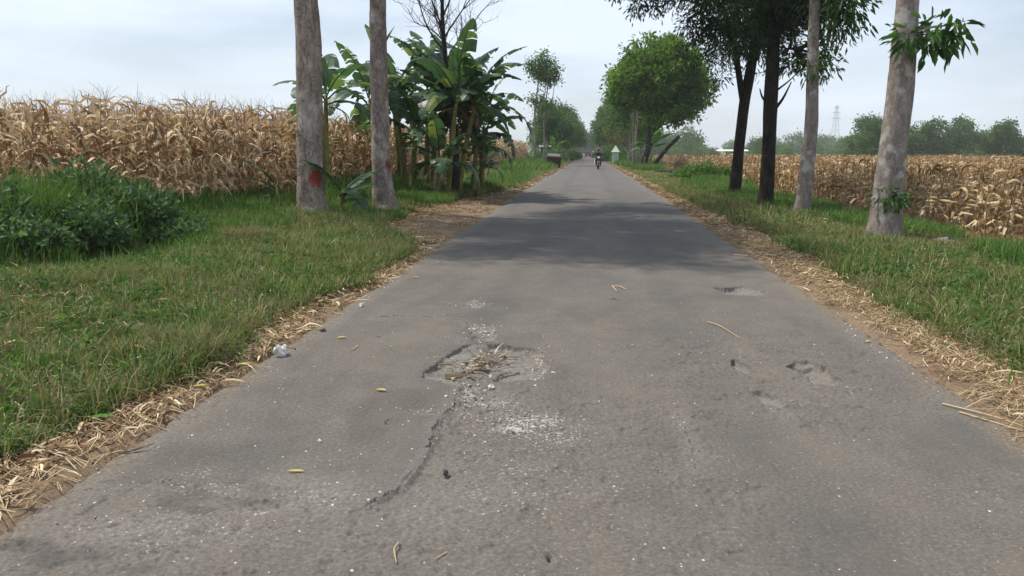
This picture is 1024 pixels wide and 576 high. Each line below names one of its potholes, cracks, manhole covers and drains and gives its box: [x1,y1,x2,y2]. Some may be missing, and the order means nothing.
pothole [752,390,788,409]
pothole [423,343,550,387]
crack [349,386,459,513]
crack [676,411,699,469]
pothole [713,286,766,296]
pothole [728,359,752,374]
pothole [786,360,845,386]
